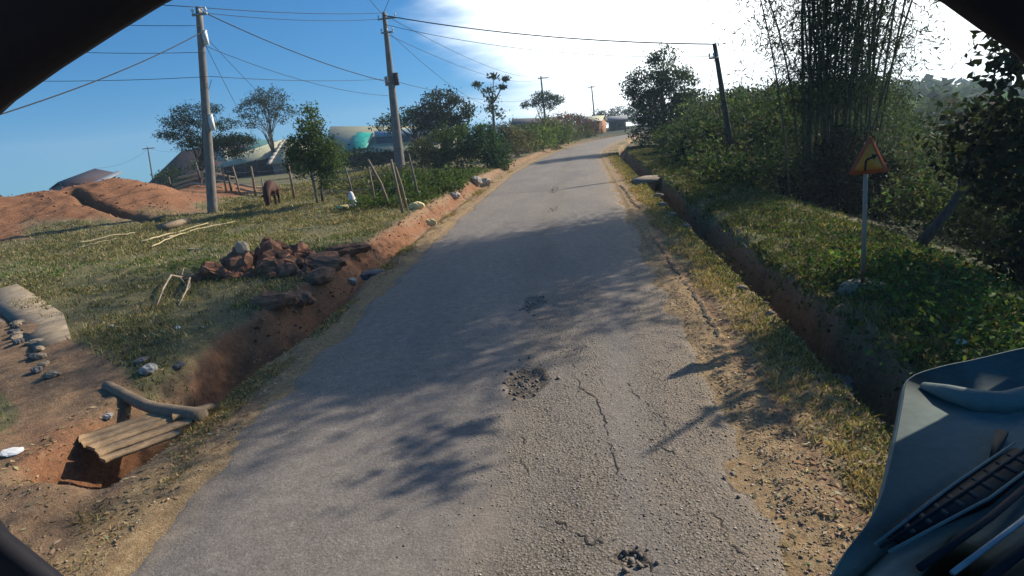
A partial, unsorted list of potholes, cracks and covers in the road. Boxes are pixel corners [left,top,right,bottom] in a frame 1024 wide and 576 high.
crack [571,363,620,475]
pothole [607,544,660,574]
pothole [519,294,547,316]
pothole [496,357,560,411]
crack [556,520,657,572]
